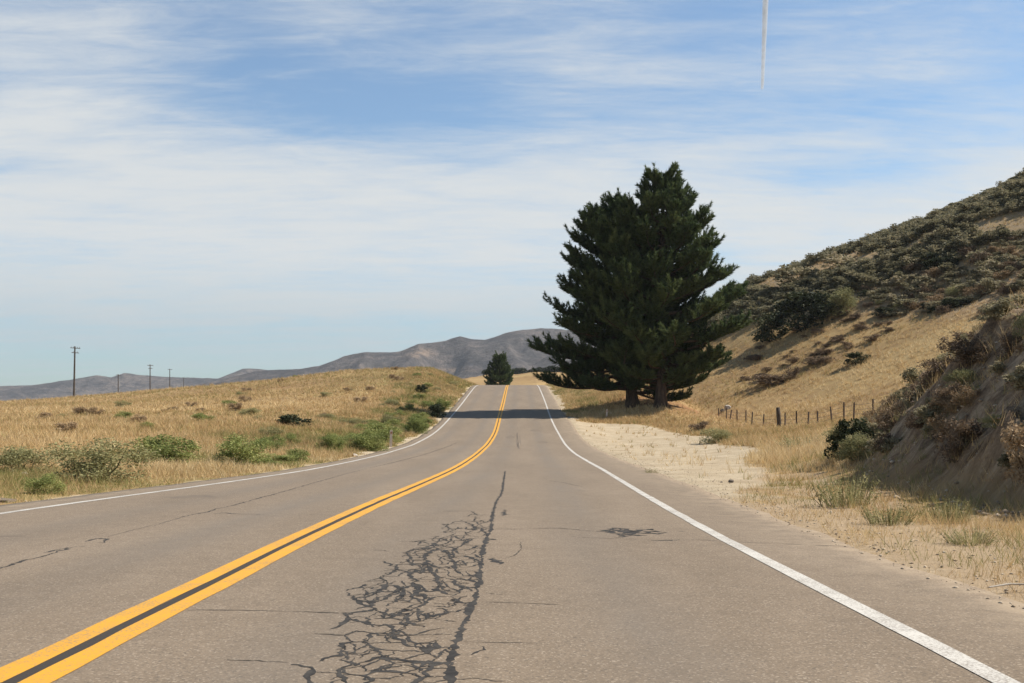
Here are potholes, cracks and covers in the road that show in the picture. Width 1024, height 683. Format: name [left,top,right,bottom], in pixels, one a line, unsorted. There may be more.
crack [0,546,83,568]
crack [154,470,360,526]
crack [227,511,673,683]
